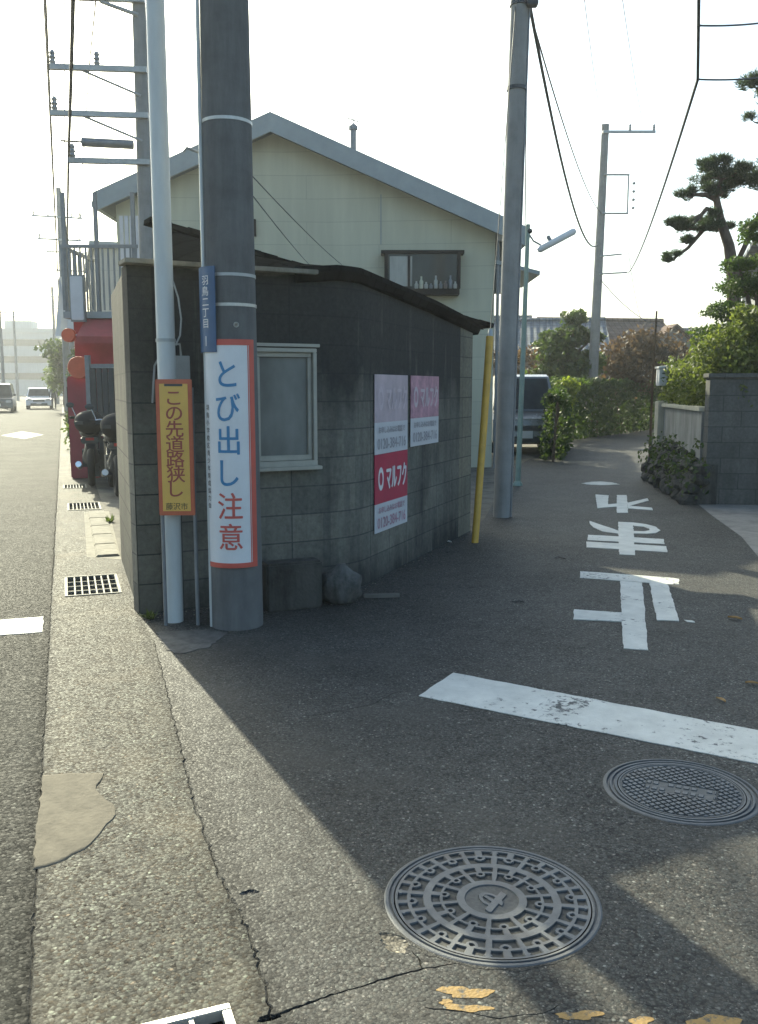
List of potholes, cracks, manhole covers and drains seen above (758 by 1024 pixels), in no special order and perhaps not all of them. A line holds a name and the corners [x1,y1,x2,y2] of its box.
crack [154,643,603,1022]
drain grate [67,502,101,511]
manhole cover [598,757,758,828]
drain grate [65,574,122,597]
manhole cover [379,843,608,972]
drain grate [144,1003,236,1024]
